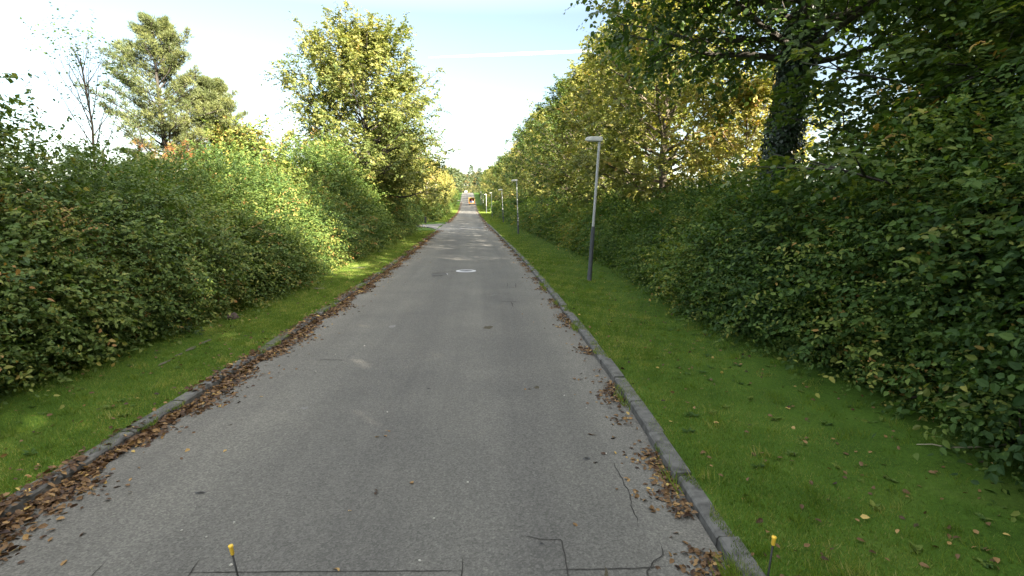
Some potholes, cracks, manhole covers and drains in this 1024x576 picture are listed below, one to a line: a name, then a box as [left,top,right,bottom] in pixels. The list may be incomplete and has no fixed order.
crack [521,535,664,576]
crack [614,463,638,526]
